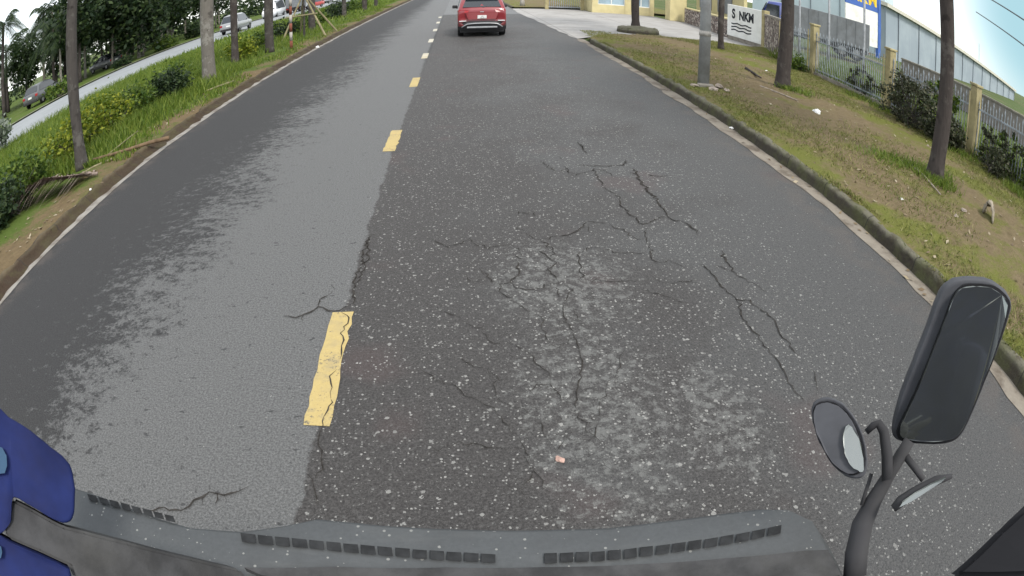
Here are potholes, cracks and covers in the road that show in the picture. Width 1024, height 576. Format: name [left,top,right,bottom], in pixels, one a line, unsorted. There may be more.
crack [151,487,247,511]
crack [422,143,698,495]
crack [289,285,353,501]
crack [703,251,818,399]
